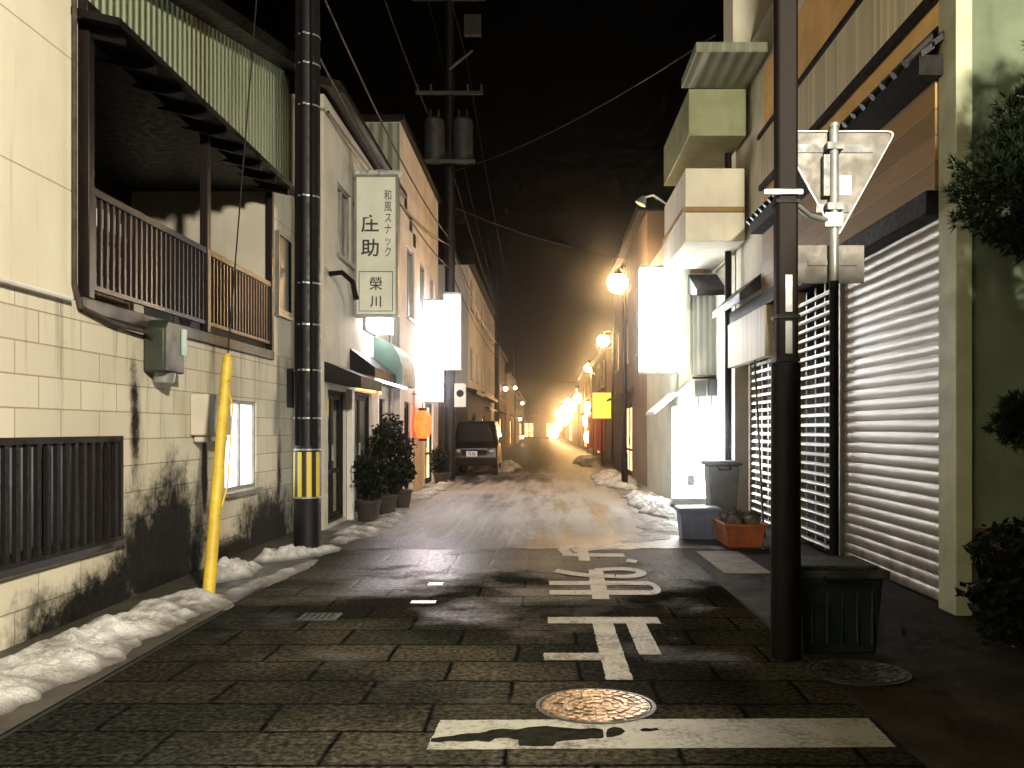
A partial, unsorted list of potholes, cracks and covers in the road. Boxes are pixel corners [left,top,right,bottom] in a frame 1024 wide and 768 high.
manhole cover [806,659,912,686]
manhole cover [536,688,656,724]
drain grate [296,613,343,621]
